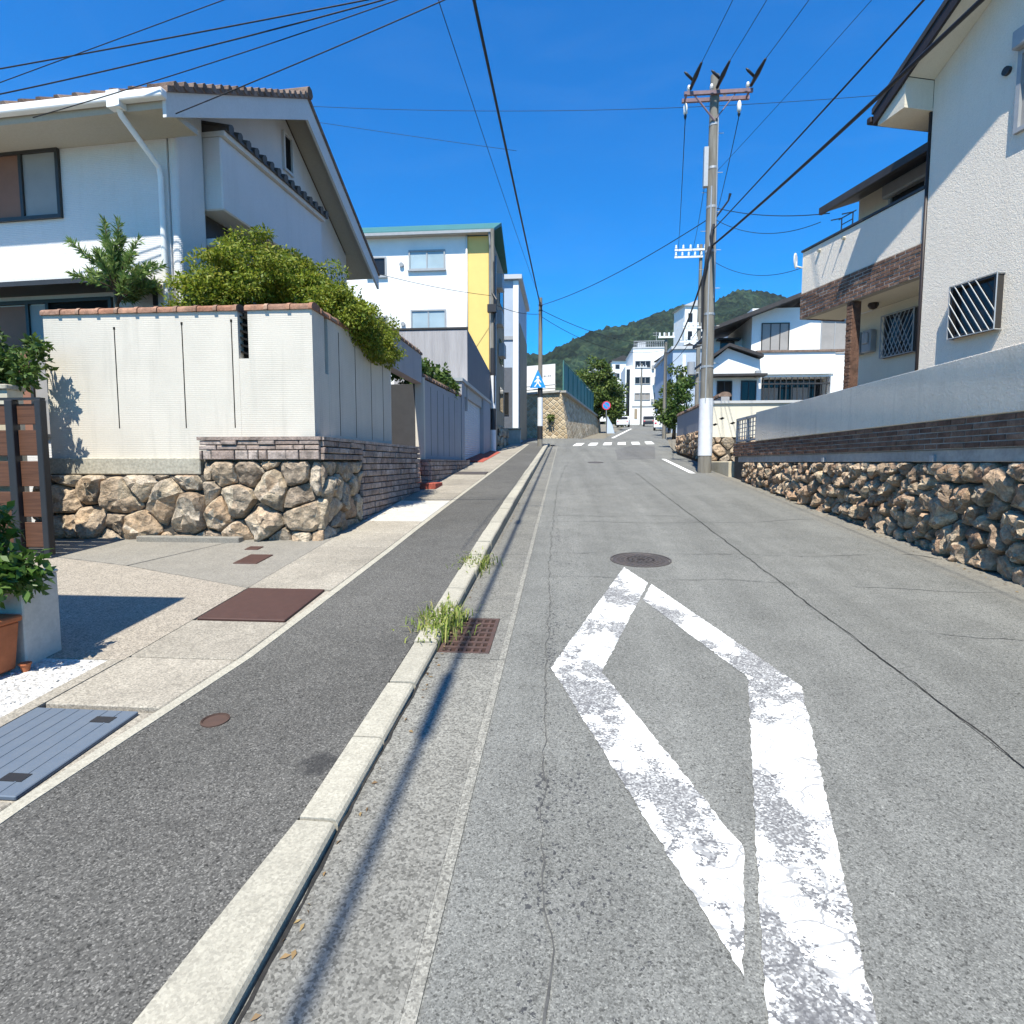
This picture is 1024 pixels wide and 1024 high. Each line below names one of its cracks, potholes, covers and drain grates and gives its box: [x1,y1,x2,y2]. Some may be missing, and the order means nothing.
manhole cover [610,552,672,568]
drain grate [438,618,500,654]
utility cover [197,588,325,623]
crack [636,473,1021,765]
crack [539,445,621,1024]
manhole cover [200,713,230,728]
utility cover [0,707,138,801]
utility cover [233,554,273,564]
